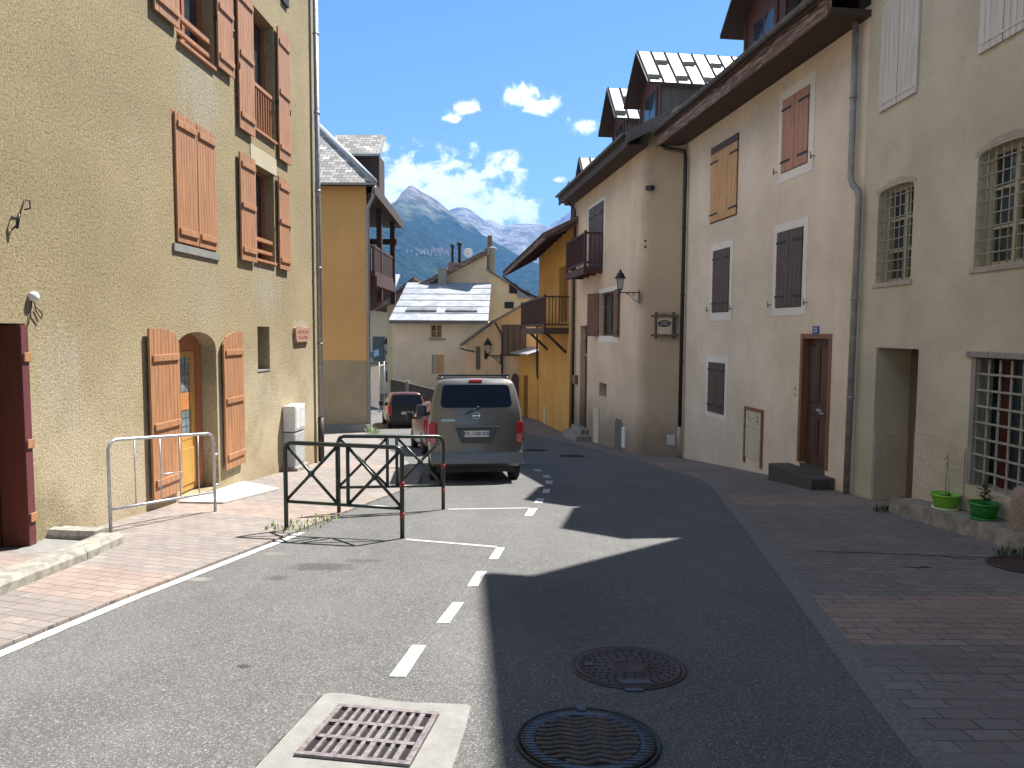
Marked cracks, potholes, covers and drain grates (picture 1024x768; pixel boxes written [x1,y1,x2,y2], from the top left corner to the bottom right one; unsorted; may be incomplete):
manhole cover [570,646,687,692]
crack [817,551,985,568]
manhole cover [985,556,1024,573]
manhole cover [515,704,662,768]
drain grate [254,692,471,768]
